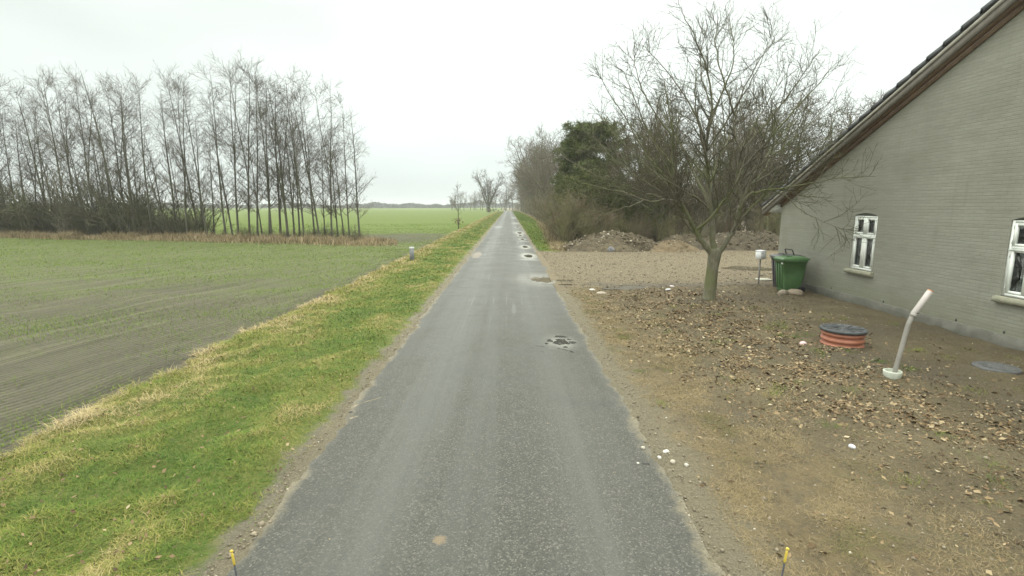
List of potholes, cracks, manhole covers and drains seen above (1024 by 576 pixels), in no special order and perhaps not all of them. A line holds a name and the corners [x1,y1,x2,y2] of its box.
utility cover [819,323,869,348]
pothole [545,336,577,348]
manhole cover [971,361,1023,375]
